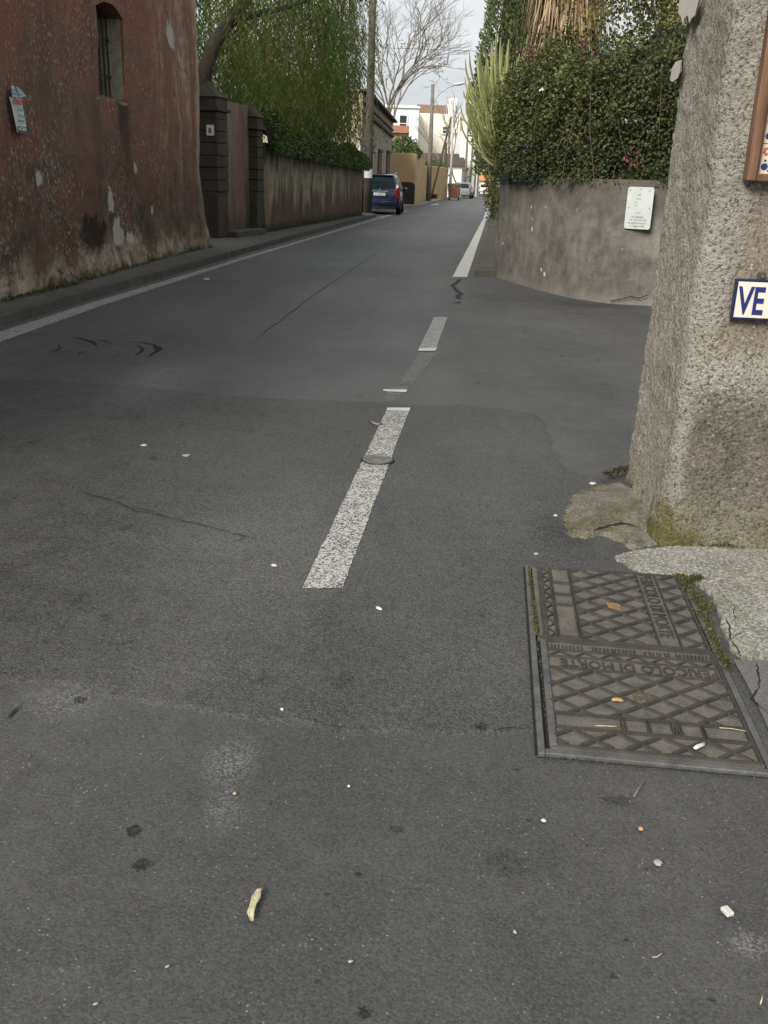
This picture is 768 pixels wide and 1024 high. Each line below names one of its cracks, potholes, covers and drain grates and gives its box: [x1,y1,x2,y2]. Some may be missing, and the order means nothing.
crack [592,522,642,532]
crack [451,279,462,303]
manhole cover [523,564,768,778]
manhole cover [361,455,395,465]
crack [718,589,768,713]
crack [78,490,248,541]
